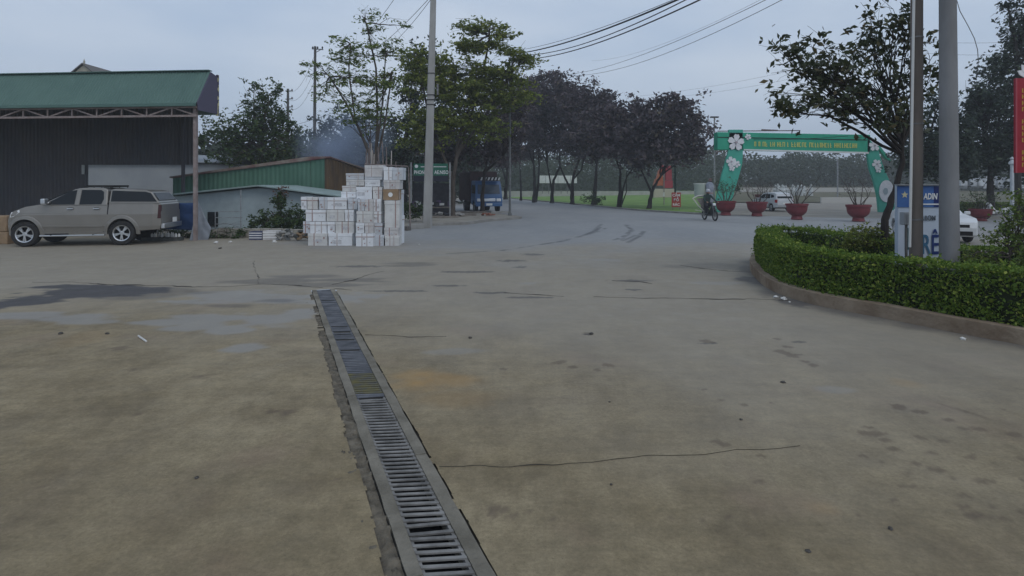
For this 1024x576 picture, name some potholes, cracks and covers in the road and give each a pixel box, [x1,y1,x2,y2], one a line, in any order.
crack [75,261,800,576]
